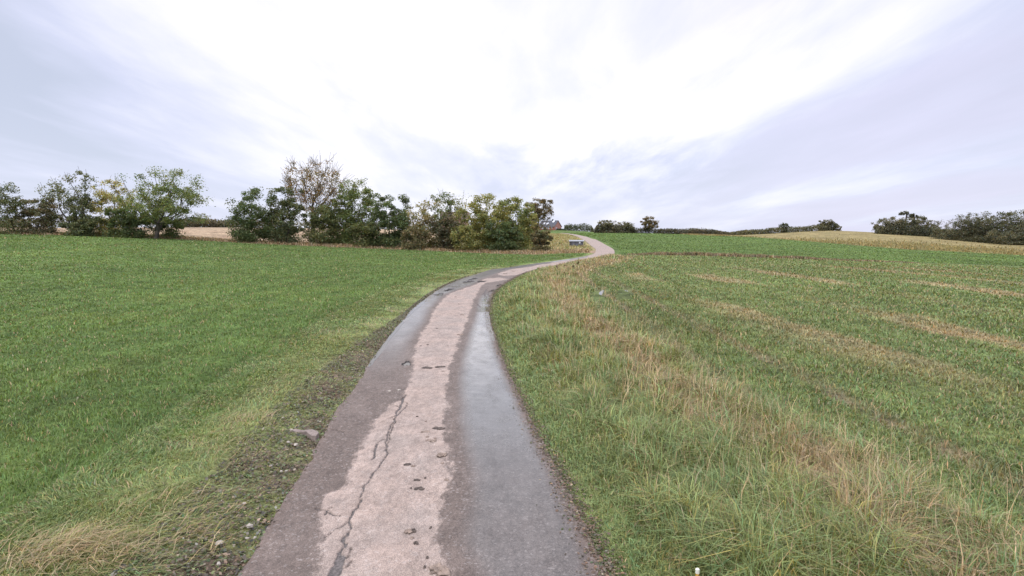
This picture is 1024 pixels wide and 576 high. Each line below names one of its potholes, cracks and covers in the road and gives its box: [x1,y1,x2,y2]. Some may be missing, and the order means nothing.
crack [316,395,408,576]
